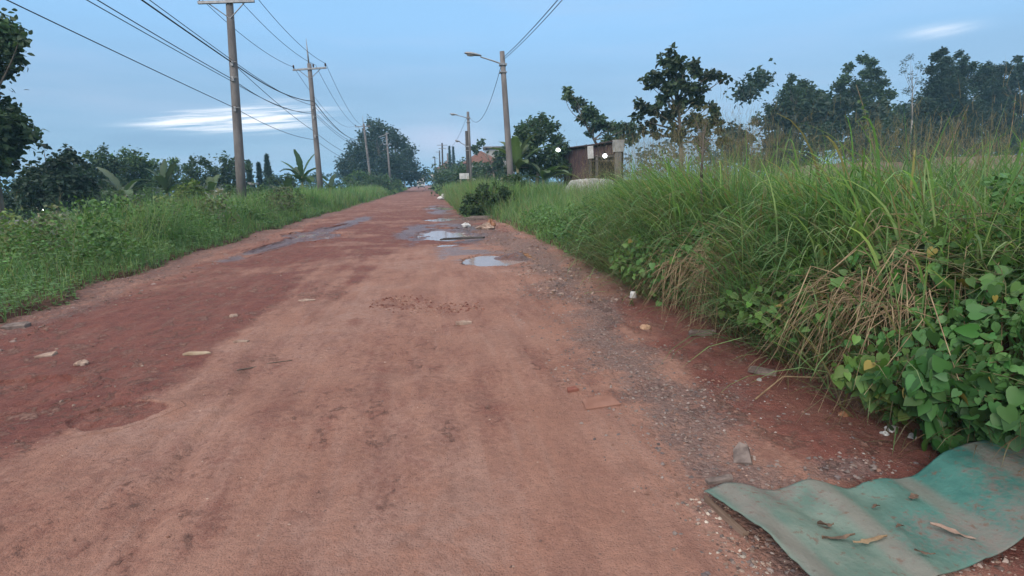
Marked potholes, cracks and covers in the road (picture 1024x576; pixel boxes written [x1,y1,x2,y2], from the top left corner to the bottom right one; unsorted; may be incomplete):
pothole [406,227,493,243]
pothole [224,221,357,260]
pothole [52,396,186,436]
pothole [454,252,537,268]
